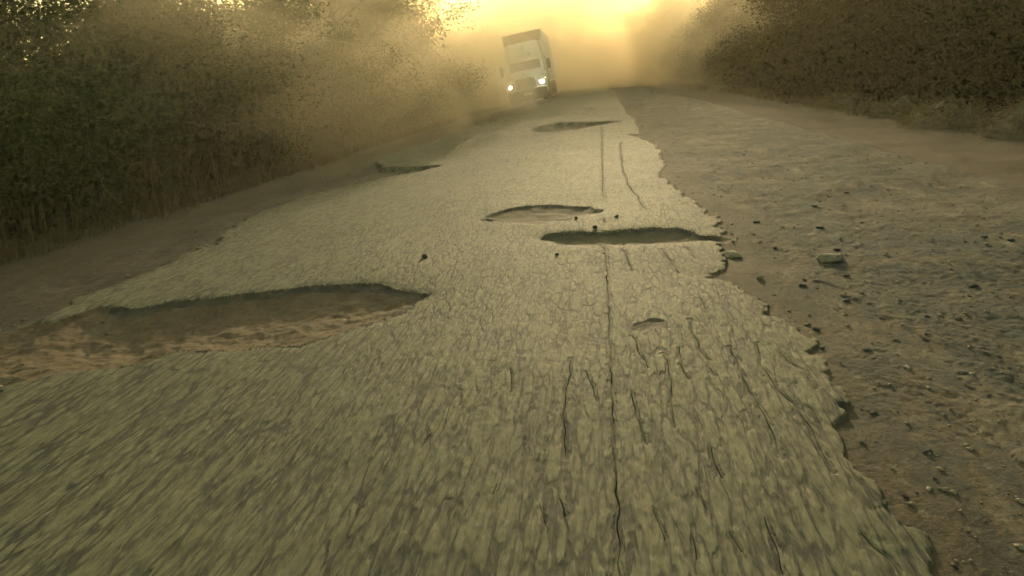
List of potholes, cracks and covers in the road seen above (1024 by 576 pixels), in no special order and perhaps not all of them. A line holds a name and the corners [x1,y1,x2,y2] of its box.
pothole [480,205,604,224]
pothole [529,121,609,133]
crack [519,247,837,576]
pothole [631,318,667,331]
crack [599,126,647,226]
pothole [541,227,737,246]
pothole [0,283,430,380]
